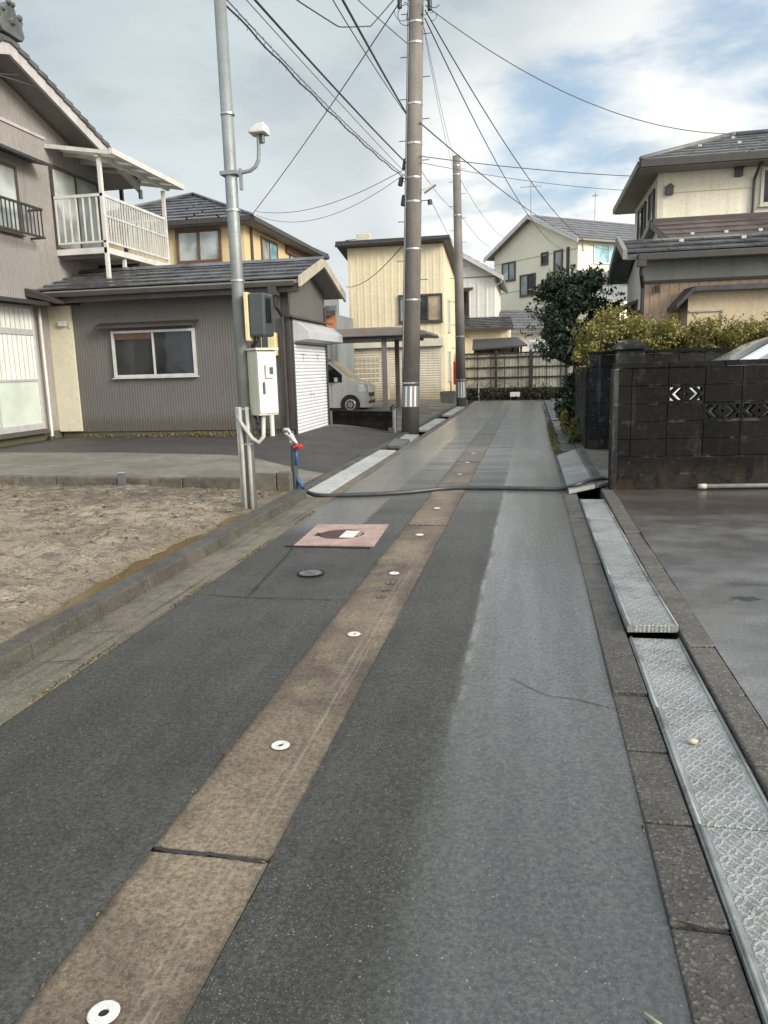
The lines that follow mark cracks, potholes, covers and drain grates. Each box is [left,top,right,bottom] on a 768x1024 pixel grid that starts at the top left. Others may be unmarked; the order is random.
manhole cover [284,524,389,548]
